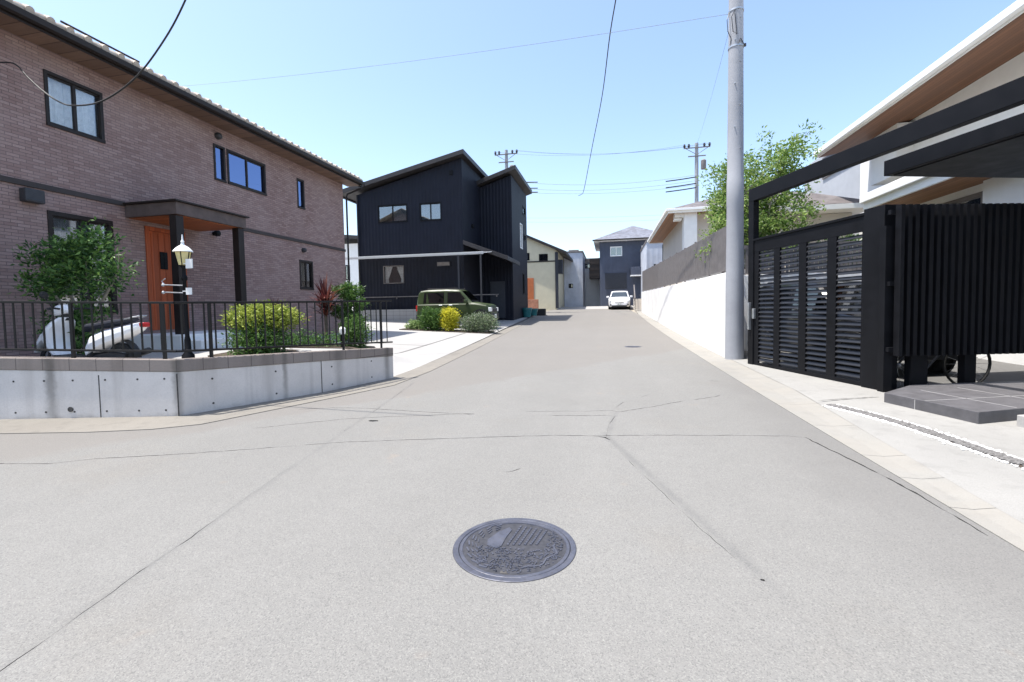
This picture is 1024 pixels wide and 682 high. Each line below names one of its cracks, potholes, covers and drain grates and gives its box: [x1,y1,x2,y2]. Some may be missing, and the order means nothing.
manhole cover [453,518,576,583]
